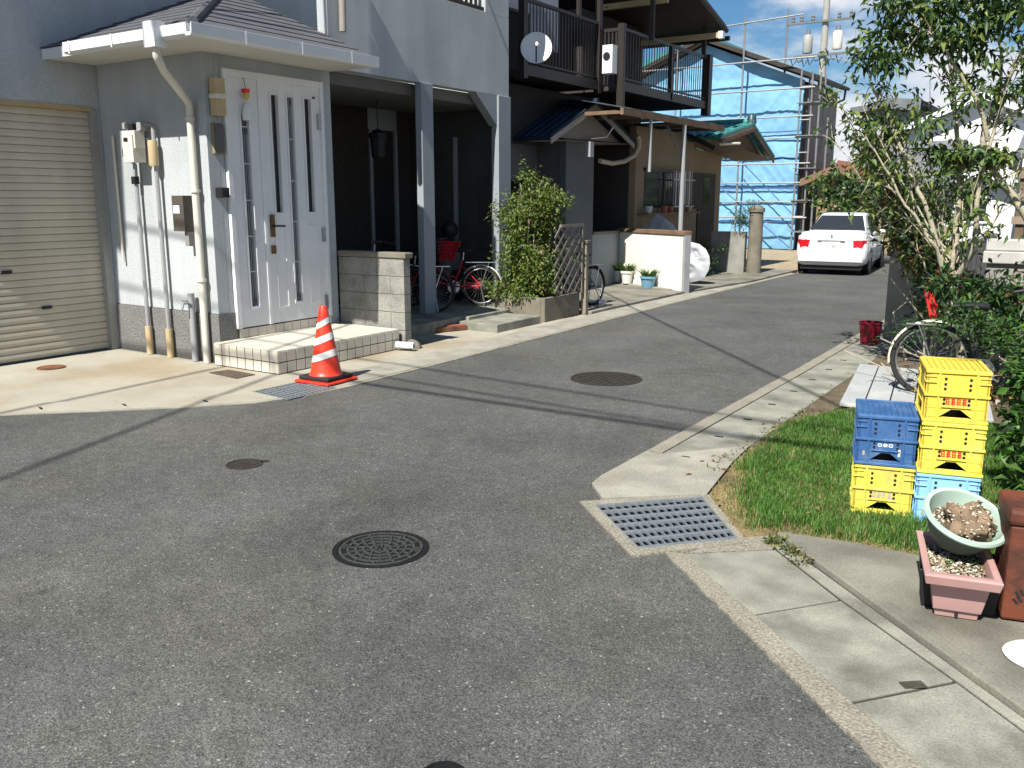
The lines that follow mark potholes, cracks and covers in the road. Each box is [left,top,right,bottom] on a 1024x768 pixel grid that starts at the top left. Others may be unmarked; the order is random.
manhole cover [209,370,255,379]
manhole cover [332,530,429,568]
manhole cover [225,458,269,470]
manhole cover [570,371,642,386]
drain grate [252,382,336,400]
drain grate [580,494,748,557]
